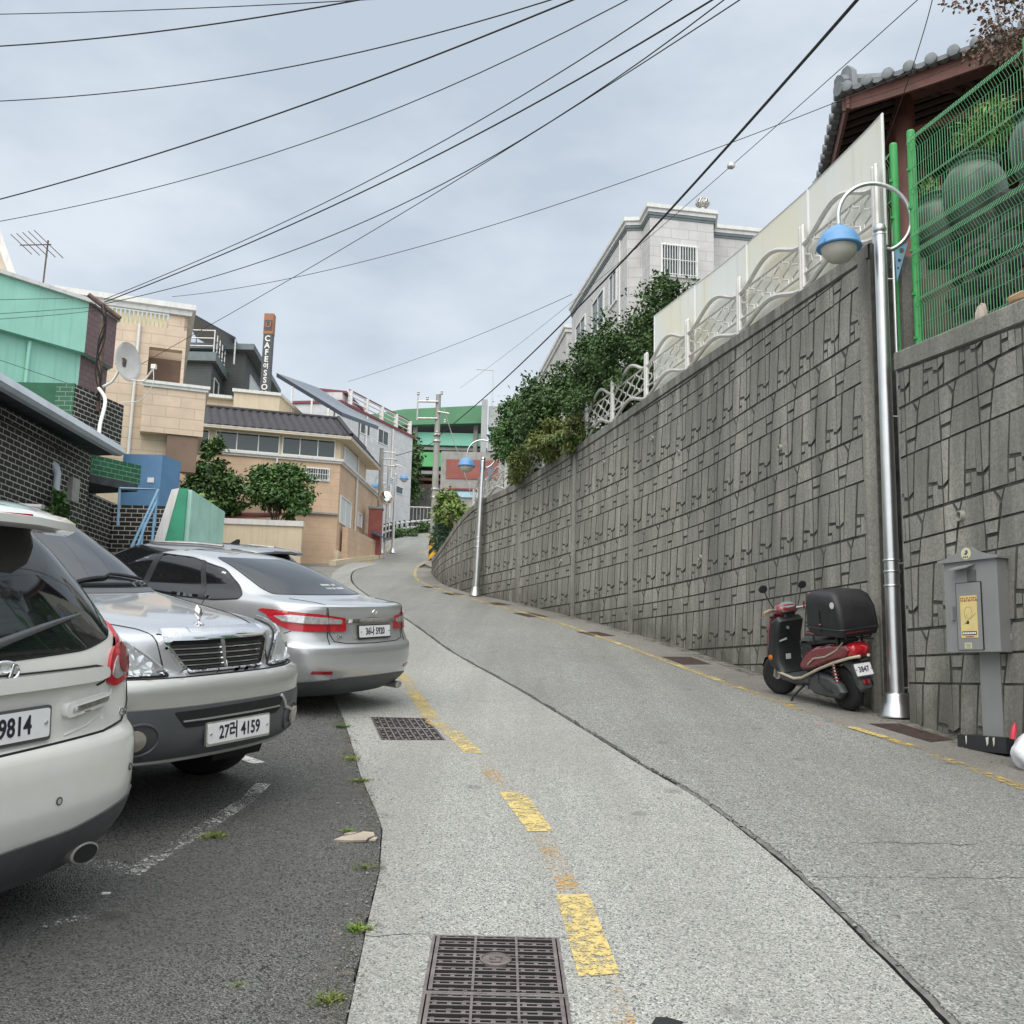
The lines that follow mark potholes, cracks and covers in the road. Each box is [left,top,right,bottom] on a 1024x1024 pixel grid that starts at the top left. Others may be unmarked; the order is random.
drain grate [376,728,445,740]
drain grate [423,934,568,996]
drain grate [664,657,709,665]
drain grate [417,992,572,1024]
drain grate [870,723,954,742]
drain grate [371,717,435,728]
